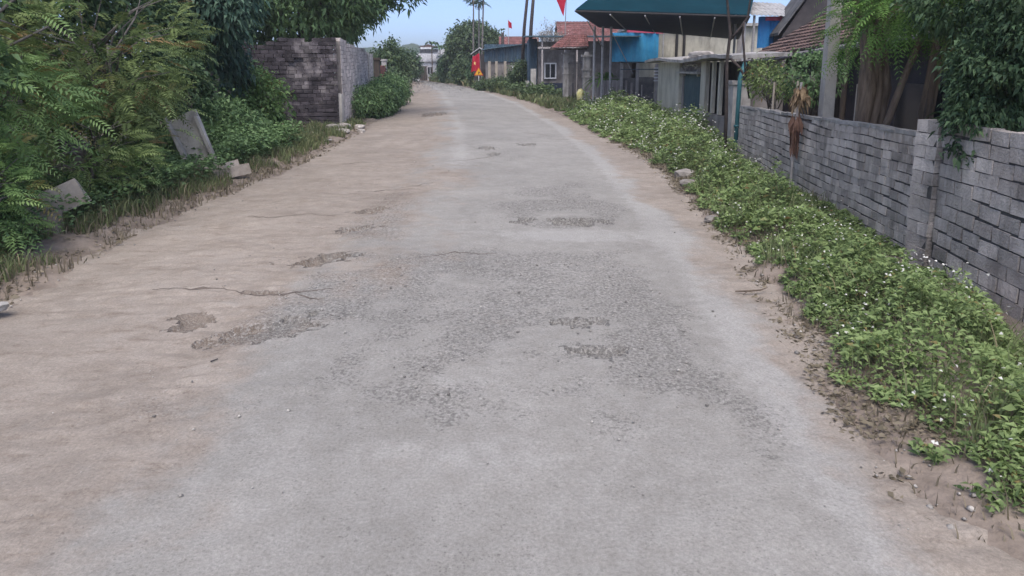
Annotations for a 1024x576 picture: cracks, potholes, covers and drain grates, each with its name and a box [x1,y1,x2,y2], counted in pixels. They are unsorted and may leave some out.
crack [152,286,327,299]
pothole [509,217,536,227]
pothole [558,343,634,362]
pothole [159,311,218,333]
pothole [344,206,390,215]
pothole [536,217,615,227]
pothole [191,309,350,352]
pothole [269,251,367,269]
pothole [548,316,621,329]
